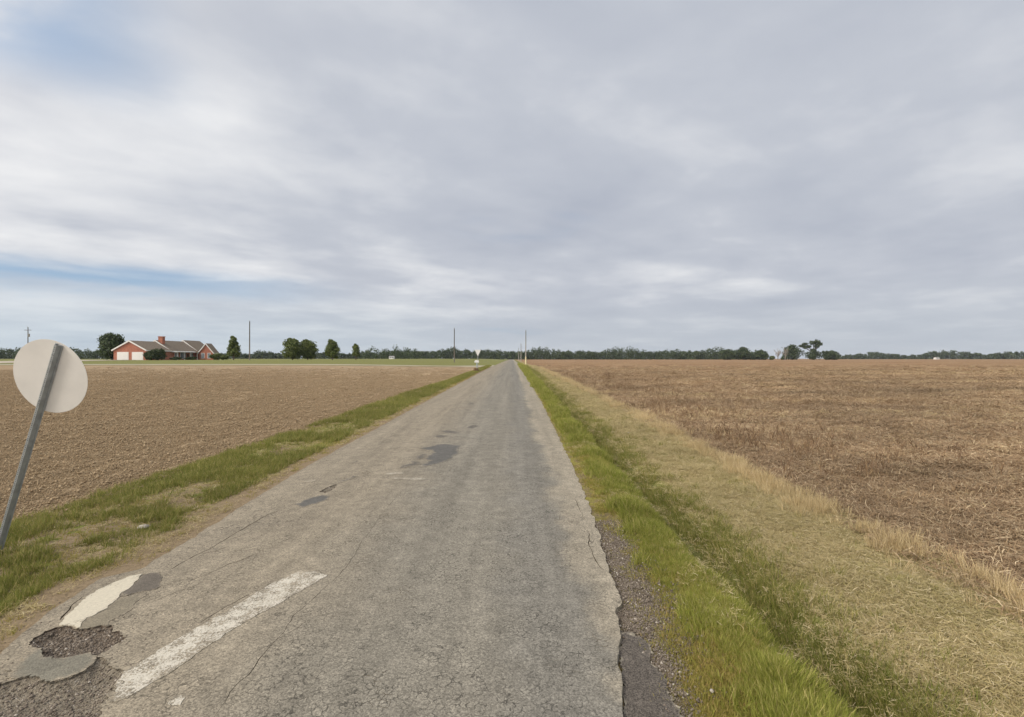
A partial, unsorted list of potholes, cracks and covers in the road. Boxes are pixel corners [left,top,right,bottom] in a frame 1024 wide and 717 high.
pothole [28,625,125,658]
crack [559,499,601,568]
crack [149,511,315,603]
pothole [0,657,125,717]
crack [214,503,391,717]
